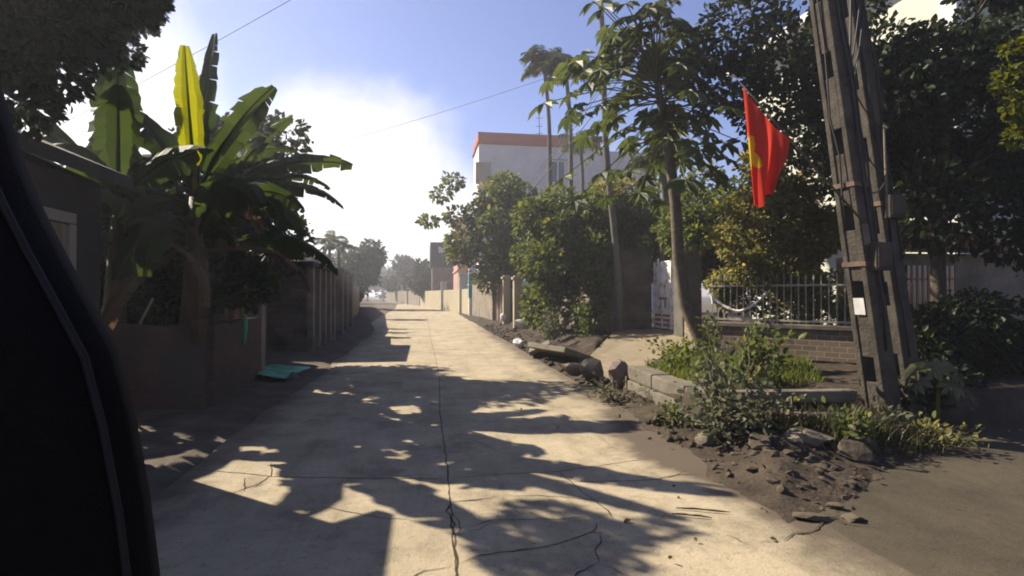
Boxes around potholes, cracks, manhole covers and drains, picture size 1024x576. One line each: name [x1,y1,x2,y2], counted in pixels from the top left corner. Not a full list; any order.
crack [414,470,687,576]
crack [222,465,272,496]
